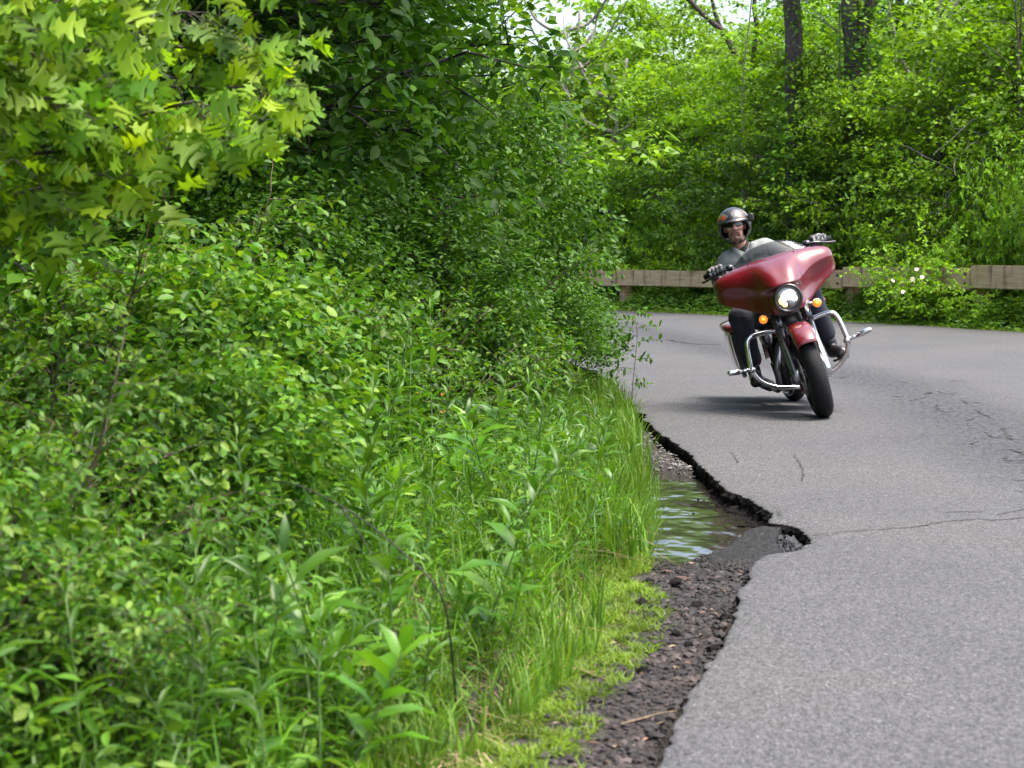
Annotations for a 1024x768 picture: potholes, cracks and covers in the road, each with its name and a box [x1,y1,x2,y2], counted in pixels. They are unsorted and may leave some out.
crack [967,410,1012,445]
crack [812,509,1024,536]
pothole [692,479,810,549]
pothole [776,534,802,553]
